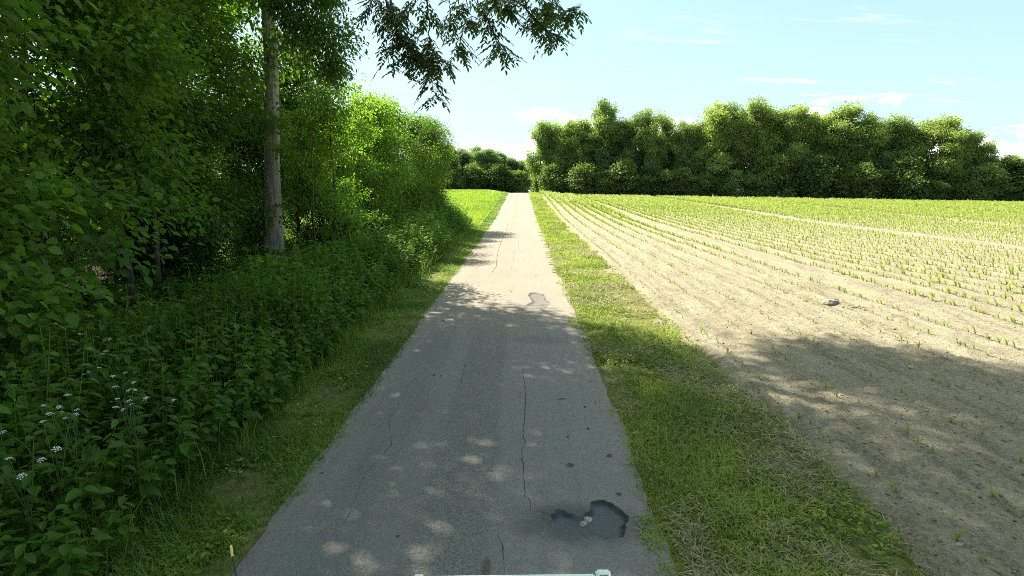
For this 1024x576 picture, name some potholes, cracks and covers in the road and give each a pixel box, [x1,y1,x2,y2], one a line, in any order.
crack [334,398,401,531]
crack [521,369,549,515]
pothole [550,500,629,539]
